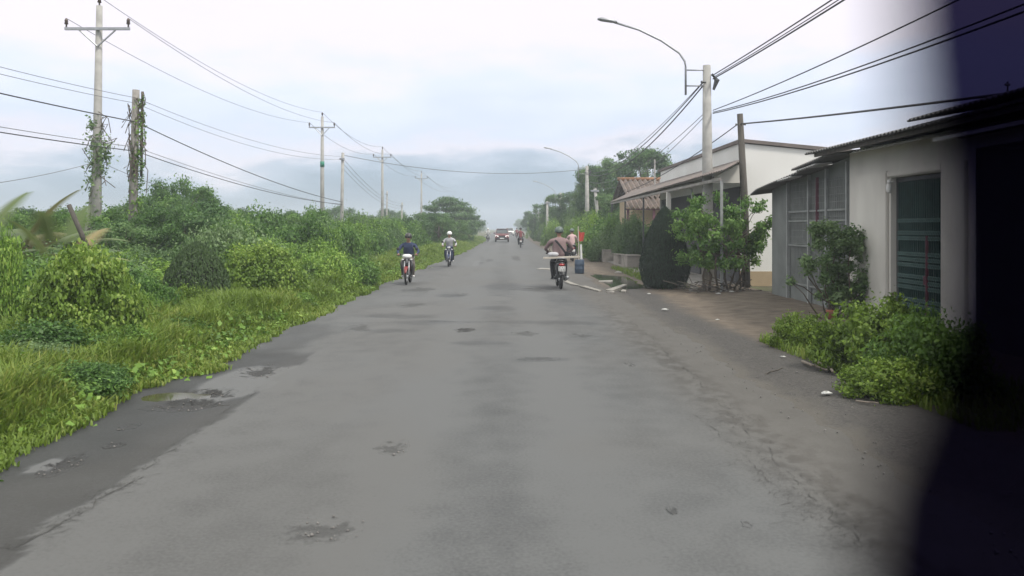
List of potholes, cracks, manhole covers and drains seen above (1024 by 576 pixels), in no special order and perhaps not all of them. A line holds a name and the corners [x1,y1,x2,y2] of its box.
pothole [186,387,242,403]
pothole [34,451,89,479]
pothole [230,364,288,379]
pothole [372,439,410,455]
pothole [272,515,364,547]
pothole [137,398,231,413]
